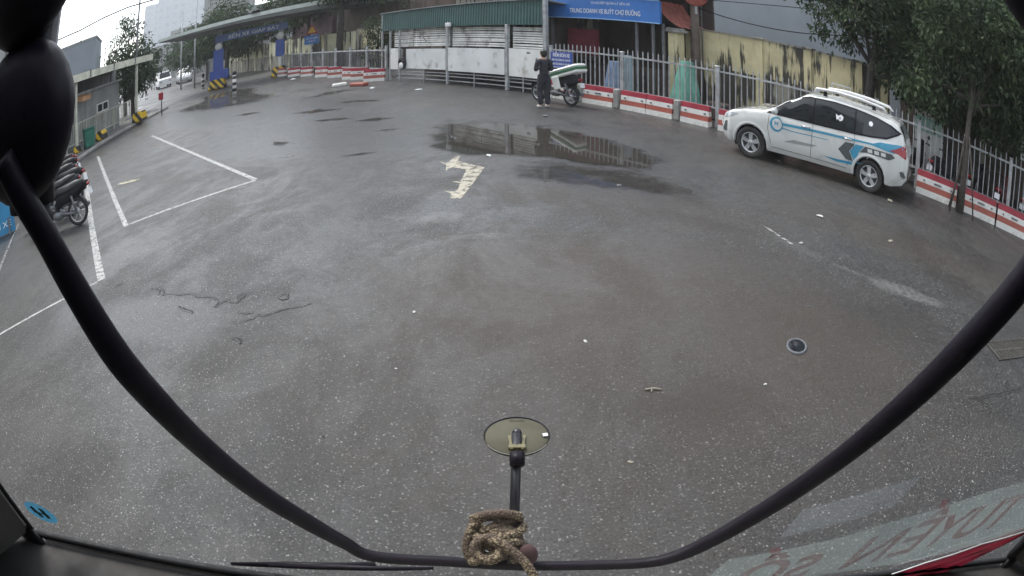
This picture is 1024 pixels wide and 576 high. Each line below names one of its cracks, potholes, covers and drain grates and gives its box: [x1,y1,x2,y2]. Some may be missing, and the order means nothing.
utility cover [786,338,807,355]
crack [151,288,312,344]
drain grate [987,338,1024,361]
crack [969,381,1024,408]
